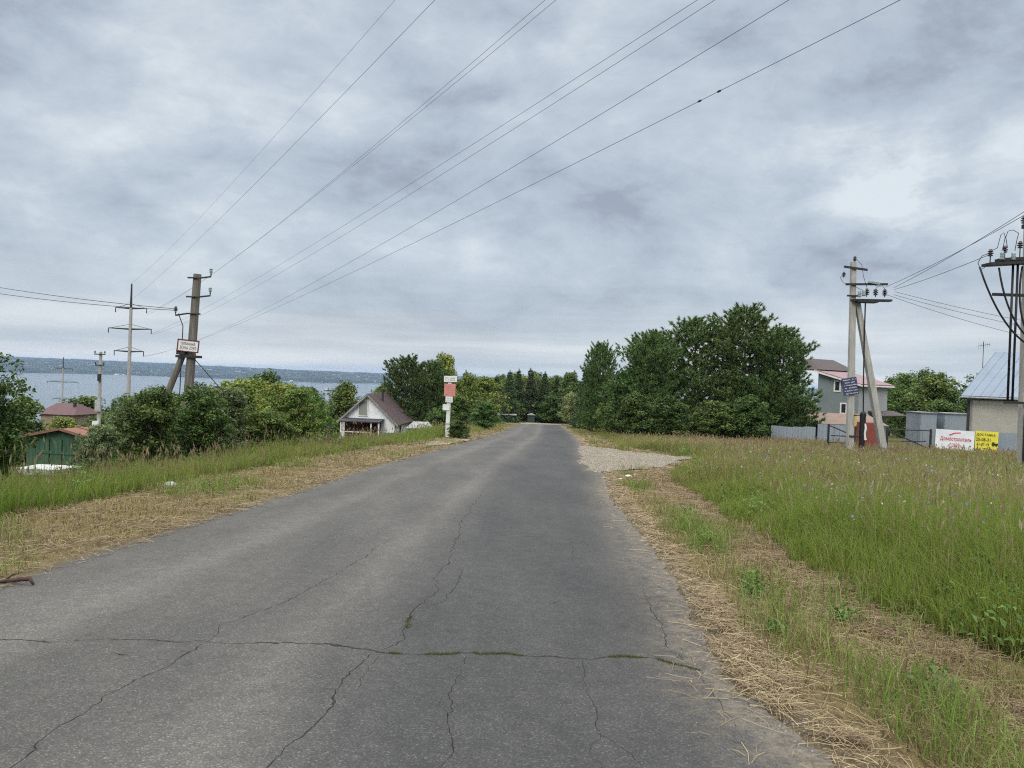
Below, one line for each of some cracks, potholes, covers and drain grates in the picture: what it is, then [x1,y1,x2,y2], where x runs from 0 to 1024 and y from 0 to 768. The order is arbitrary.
crack [0,499,740,768]
